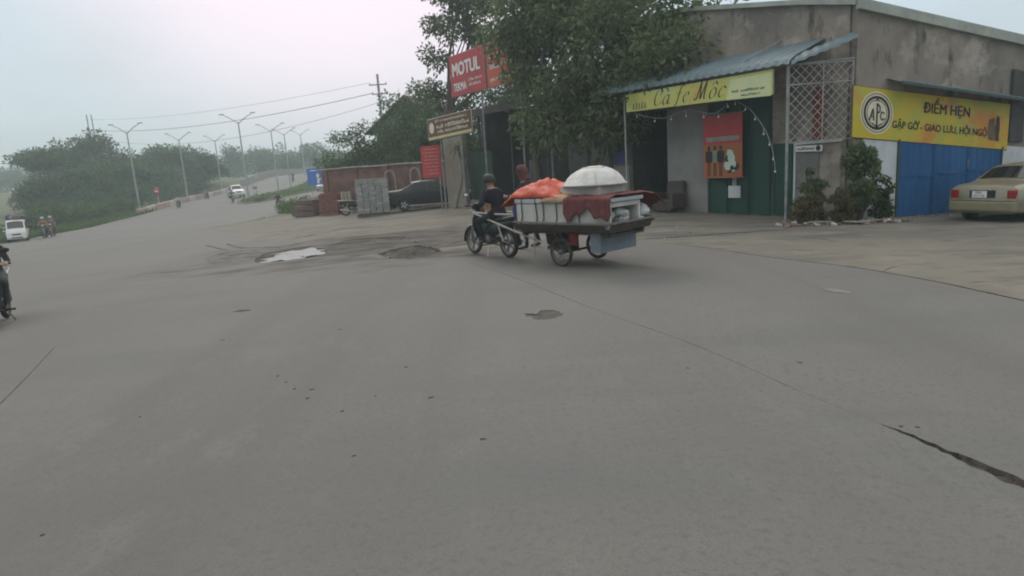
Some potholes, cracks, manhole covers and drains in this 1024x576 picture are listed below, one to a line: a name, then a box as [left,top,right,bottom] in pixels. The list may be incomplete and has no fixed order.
crack [879,423,1024,488]
pothole [378,245,442,259]
pothole [255,246,327,263]
pothole [525,310,563,320]
